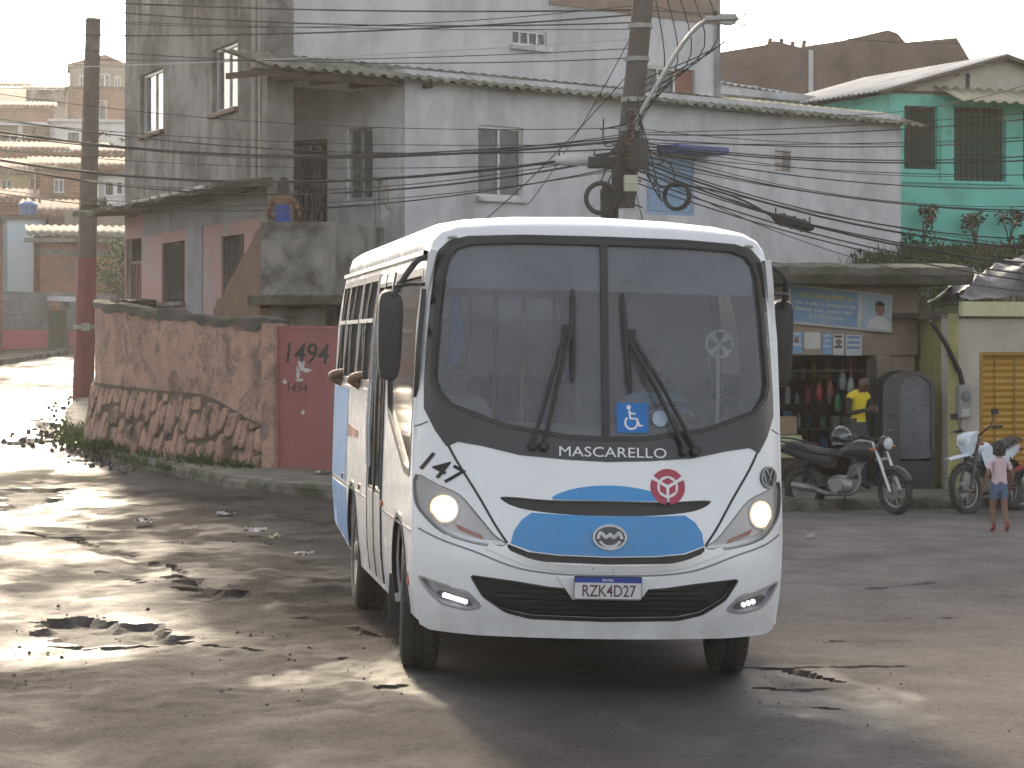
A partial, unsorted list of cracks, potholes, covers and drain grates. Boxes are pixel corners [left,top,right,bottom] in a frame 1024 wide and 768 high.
crack [742,665,912,712]
pothole [52,533,88,542]
pothole [155,574,290,603]
pothole [23,614,204,651]
crack [865,582,936,590]
